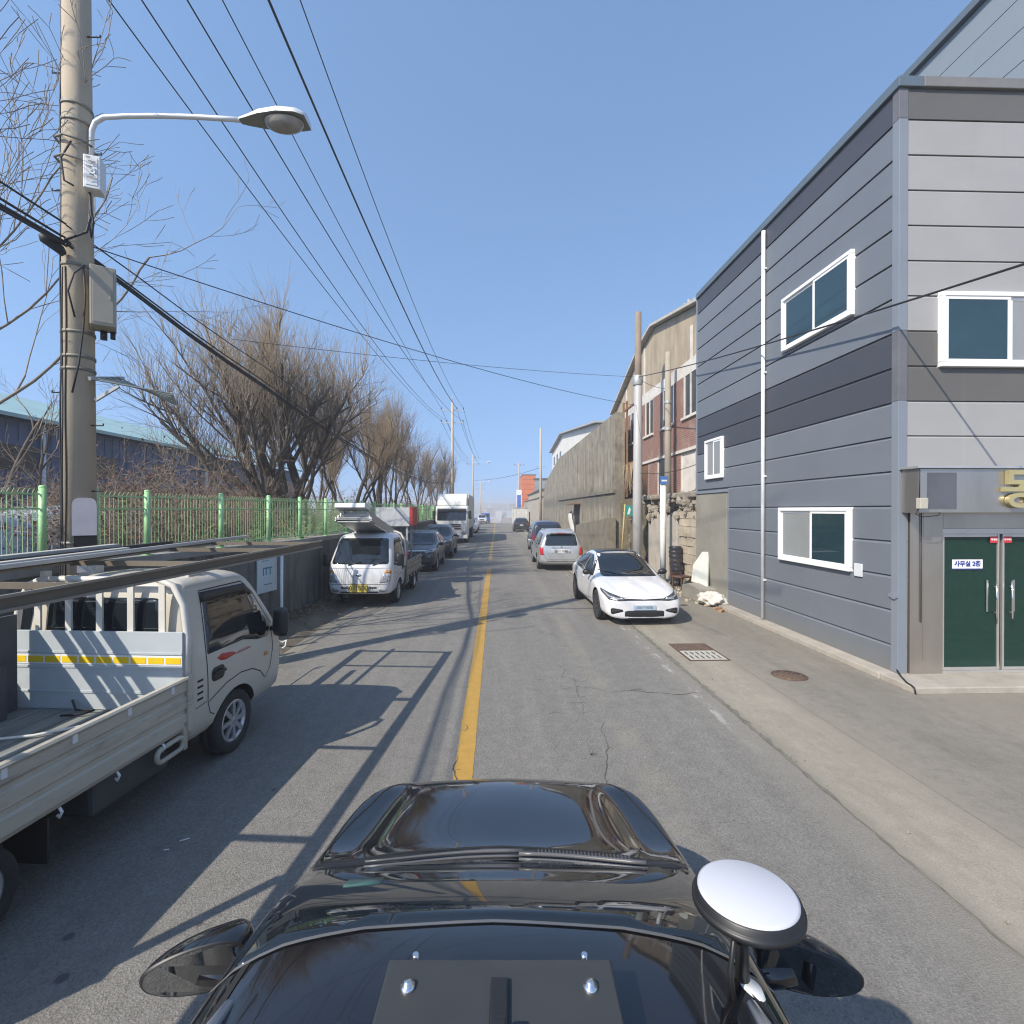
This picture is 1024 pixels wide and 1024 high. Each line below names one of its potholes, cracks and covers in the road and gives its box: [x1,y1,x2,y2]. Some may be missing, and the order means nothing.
manhole cover [771,670,808,681]
crack [533,663,590,715]
